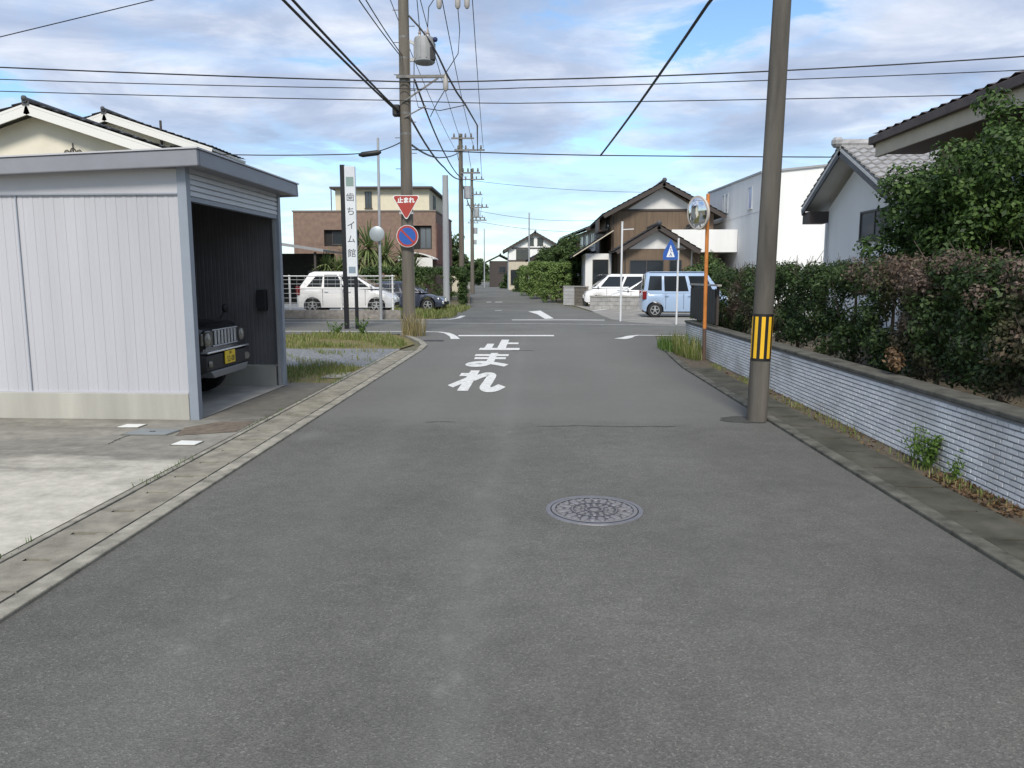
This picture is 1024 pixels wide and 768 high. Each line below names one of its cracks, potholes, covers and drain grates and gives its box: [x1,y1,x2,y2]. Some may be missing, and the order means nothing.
manhole cover [546,496,644,526]
